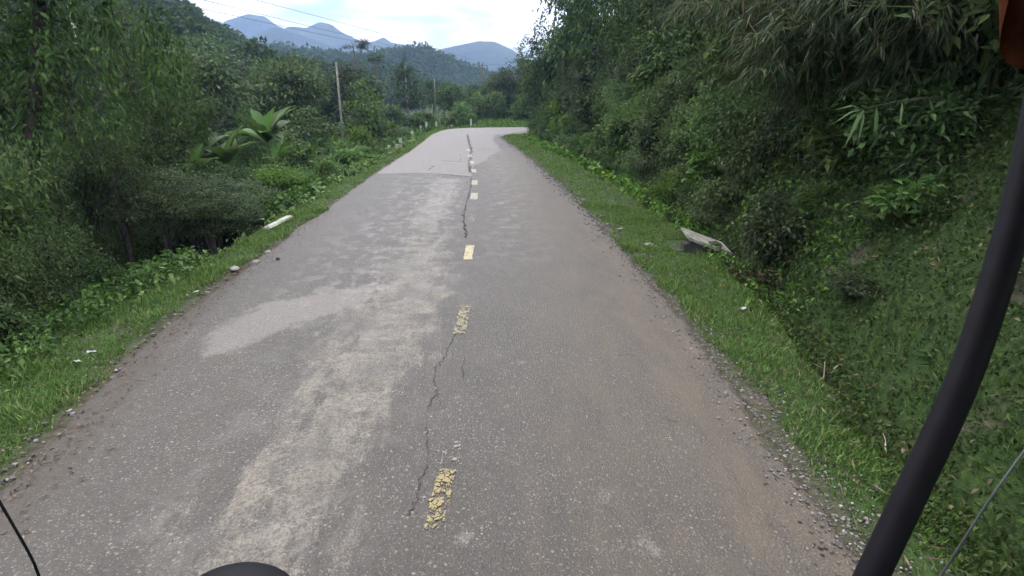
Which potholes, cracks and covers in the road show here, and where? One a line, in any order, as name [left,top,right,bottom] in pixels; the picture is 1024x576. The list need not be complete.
crack [409,426,429,514]
crack [426,335,465,412]
